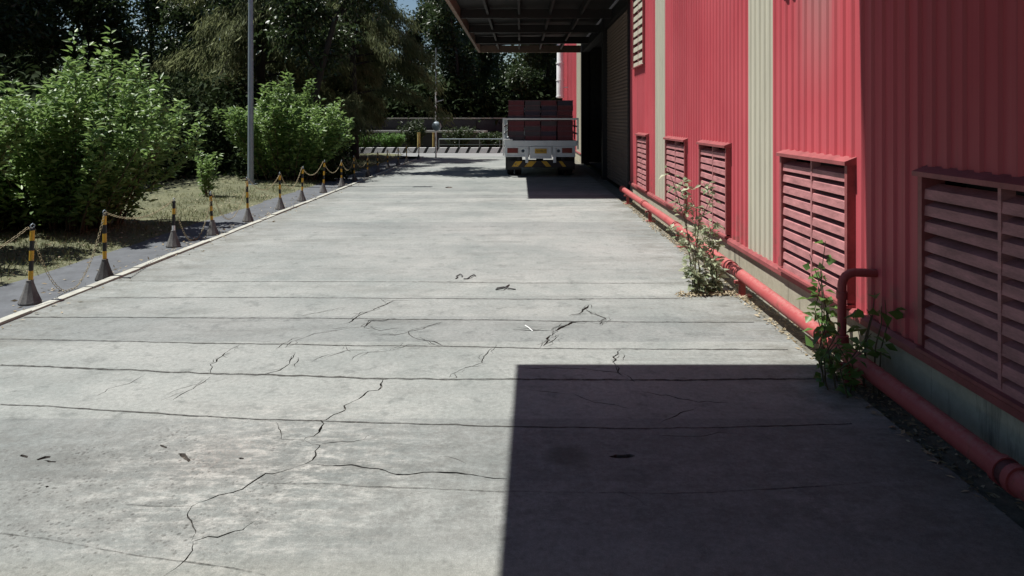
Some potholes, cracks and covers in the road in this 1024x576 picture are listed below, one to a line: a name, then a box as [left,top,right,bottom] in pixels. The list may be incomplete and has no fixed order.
crack [520,350,732,437]
crack [514,298,611,347]
crack [167,380,506,574]
crack [165,347,238,400]
crack [256,299,450,376]
